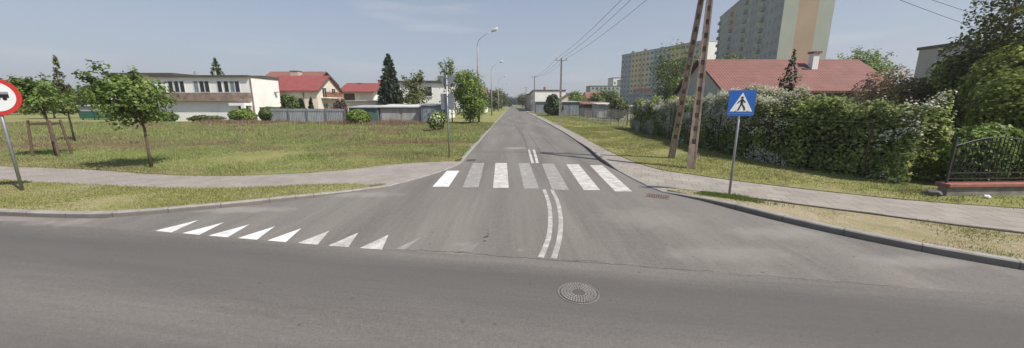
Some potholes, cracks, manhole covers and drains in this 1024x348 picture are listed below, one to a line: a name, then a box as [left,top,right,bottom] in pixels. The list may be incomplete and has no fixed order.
manhole cover [558,282,600,304]
